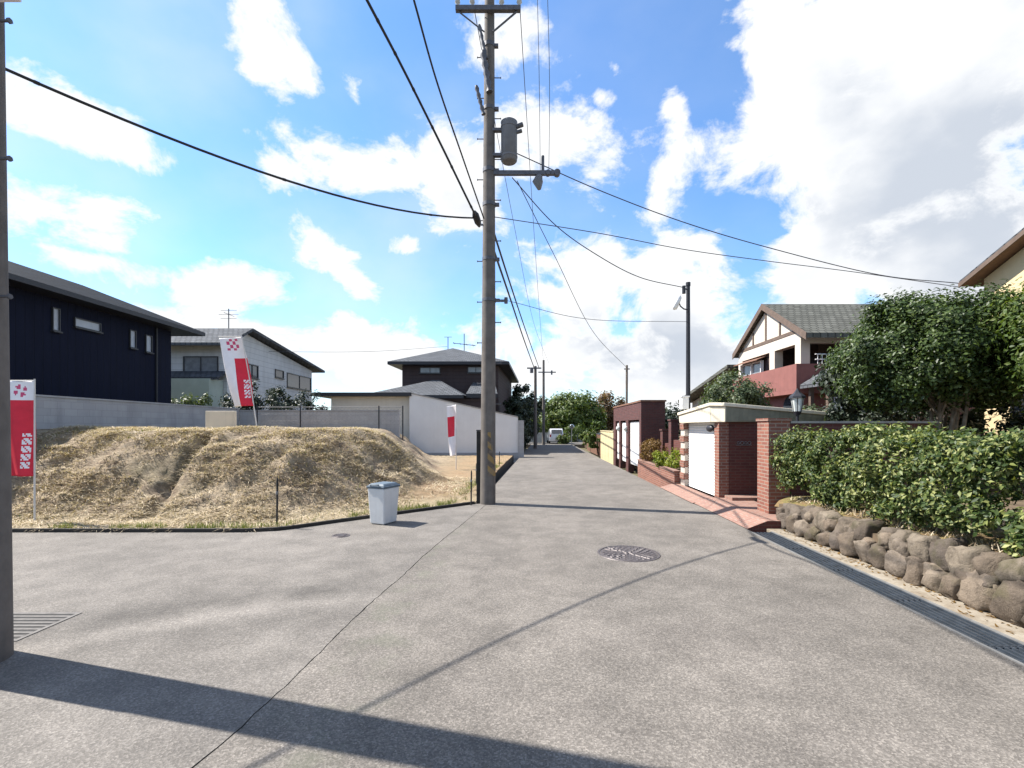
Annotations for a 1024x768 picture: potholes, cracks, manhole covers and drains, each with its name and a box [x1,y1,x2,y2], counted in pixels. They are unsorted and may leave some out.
drain grate [13,612,82,642]
manhole cover [597,545,661,562]
